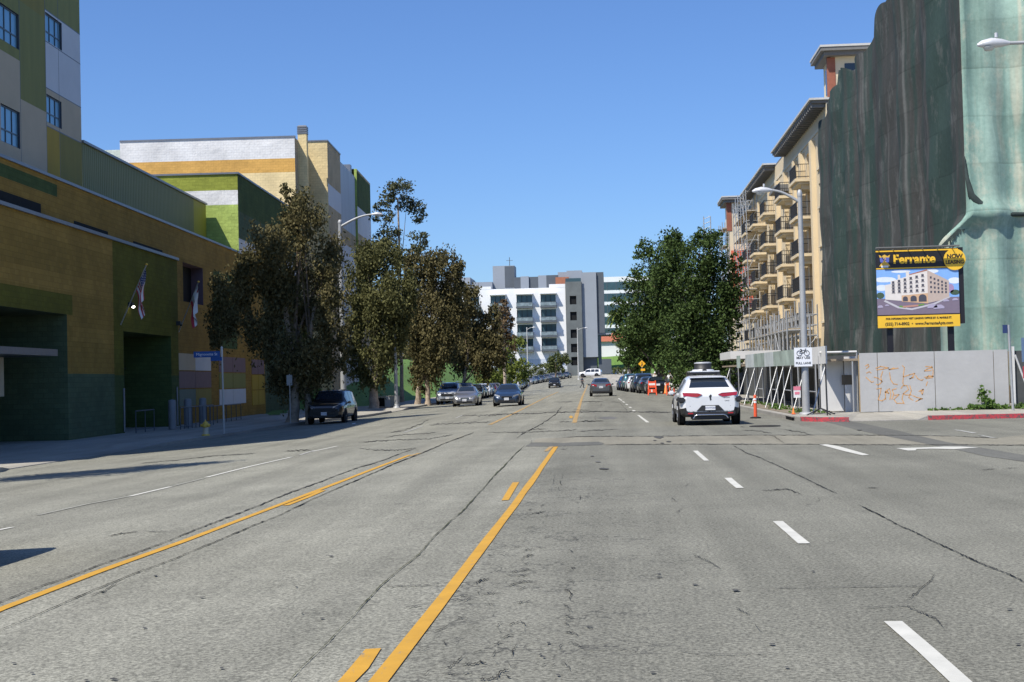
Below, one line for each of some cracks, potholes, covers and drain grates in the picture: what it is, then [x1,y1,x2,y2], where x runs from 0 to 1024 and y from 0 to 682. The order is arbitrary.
crack [860,505,1023,581]
crack [771,575,942,625]
crack [735,446,833,495]
